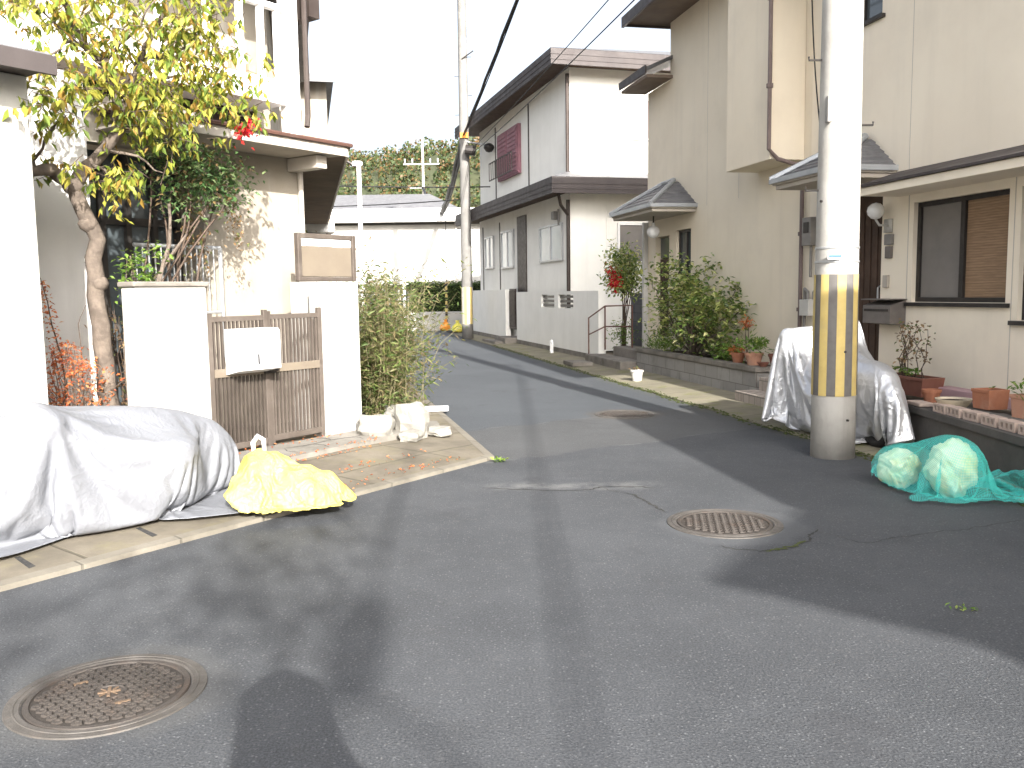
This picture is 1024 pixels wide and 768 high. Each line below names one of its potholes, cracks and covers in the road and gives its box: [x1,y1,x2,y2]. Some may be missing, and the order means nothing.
manhole cover [2,654,208,740]
crack [721,520,1022,552]
crack [497,486,665,512]
manhole cover [595,410,654,419]
manhole cover [667,509,784,539]
